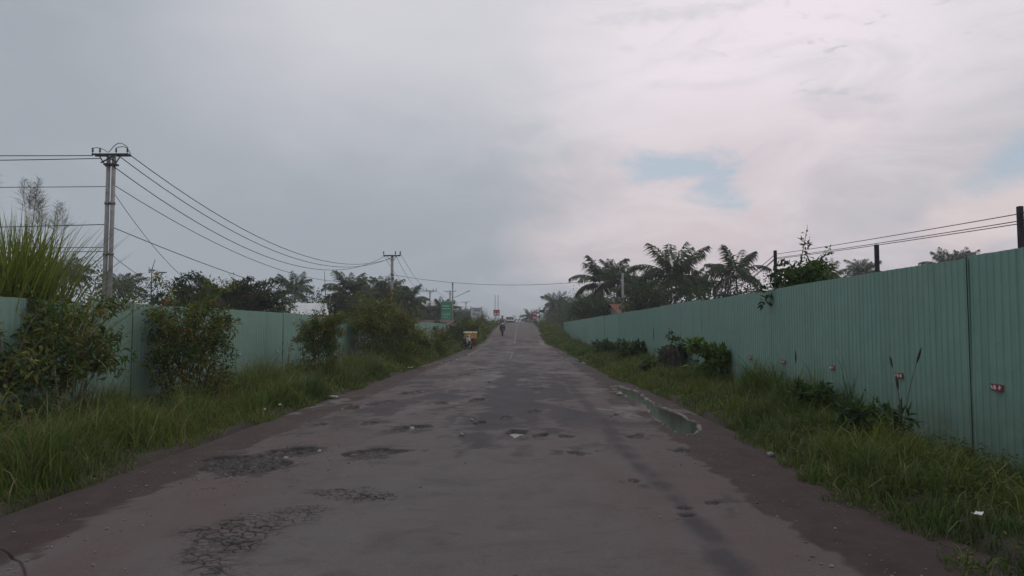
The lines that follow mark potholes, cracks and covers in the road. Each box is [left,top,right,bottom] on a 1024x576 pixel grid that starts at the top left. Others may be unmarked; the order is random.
pothole [337,448,421,460]
pothole [387,424,436,433]
pothole [194,446,328,478]
crack [158,485,403,576]
pothole [611,385,701,434]
pothole [503,429,530,438]
